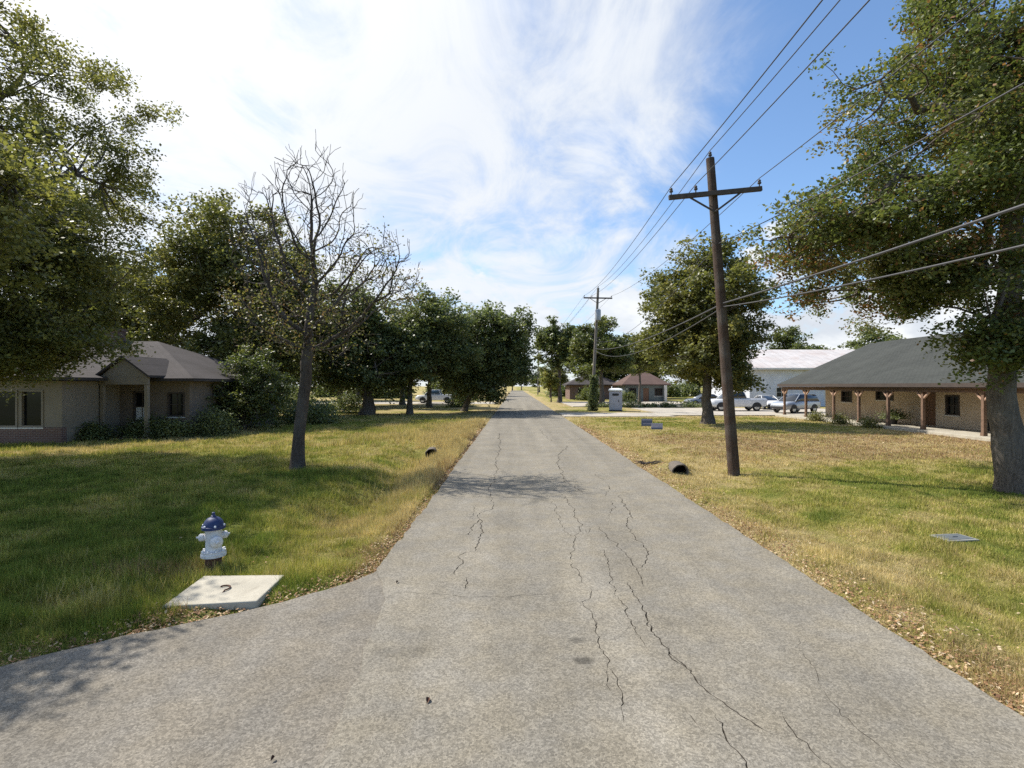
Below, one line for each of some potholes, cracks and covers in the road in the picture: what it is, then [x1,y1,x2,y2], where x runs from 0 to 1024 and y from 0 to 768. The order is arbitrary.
crack [401,434,555,597]
crack [540,430,788,768]
crack [796,635,901,767]
crack [782,712,832,768]
